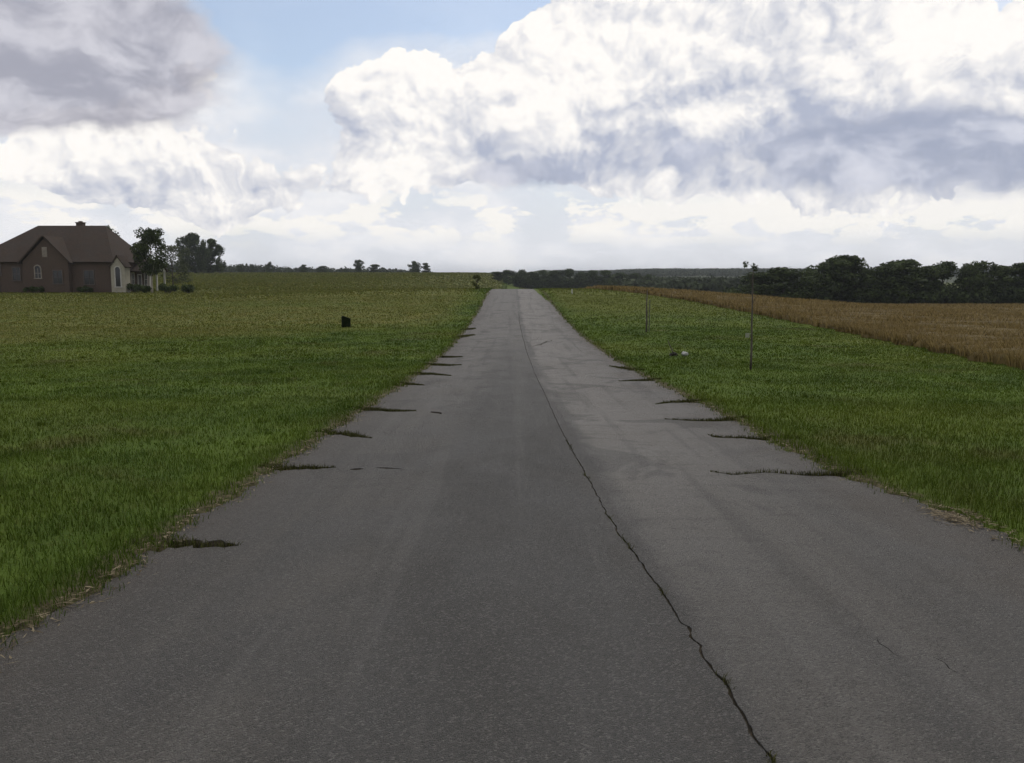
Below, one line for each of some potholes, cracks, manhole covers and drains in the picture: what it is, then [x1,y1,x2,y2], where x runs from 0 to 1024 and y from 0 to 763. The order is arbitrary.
crack [657,398,800,441]
crack [518,314,778,763]
crack [256,460,393,471]
crack [308,406,442,438]
